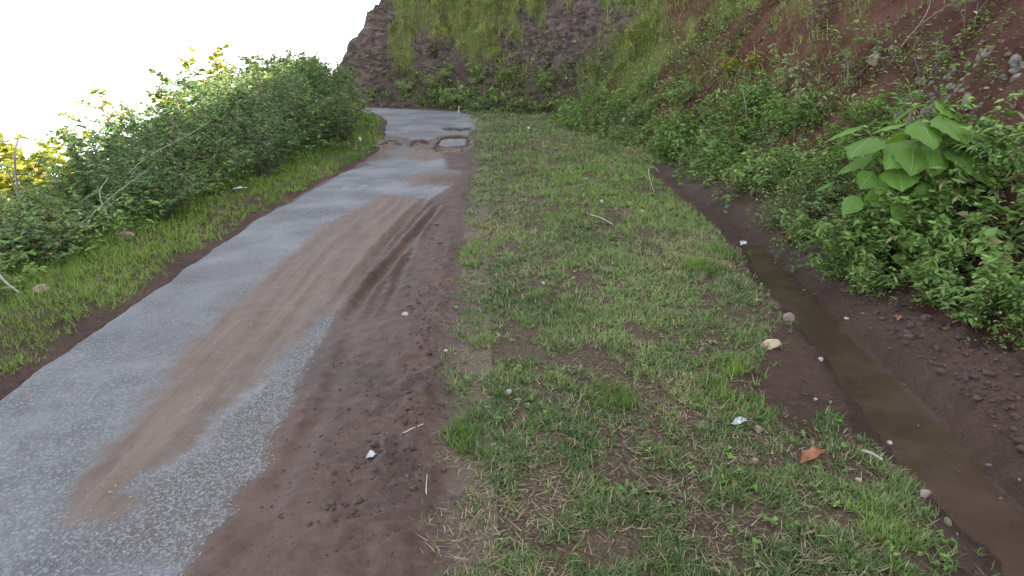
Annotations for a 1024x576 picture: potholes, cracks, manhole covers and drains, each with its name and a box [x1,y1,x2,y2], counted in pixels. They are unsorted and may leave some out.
pothole [426,135,475,154]
pothole [405,139,438,149]
pothole [372,138,405,148]
